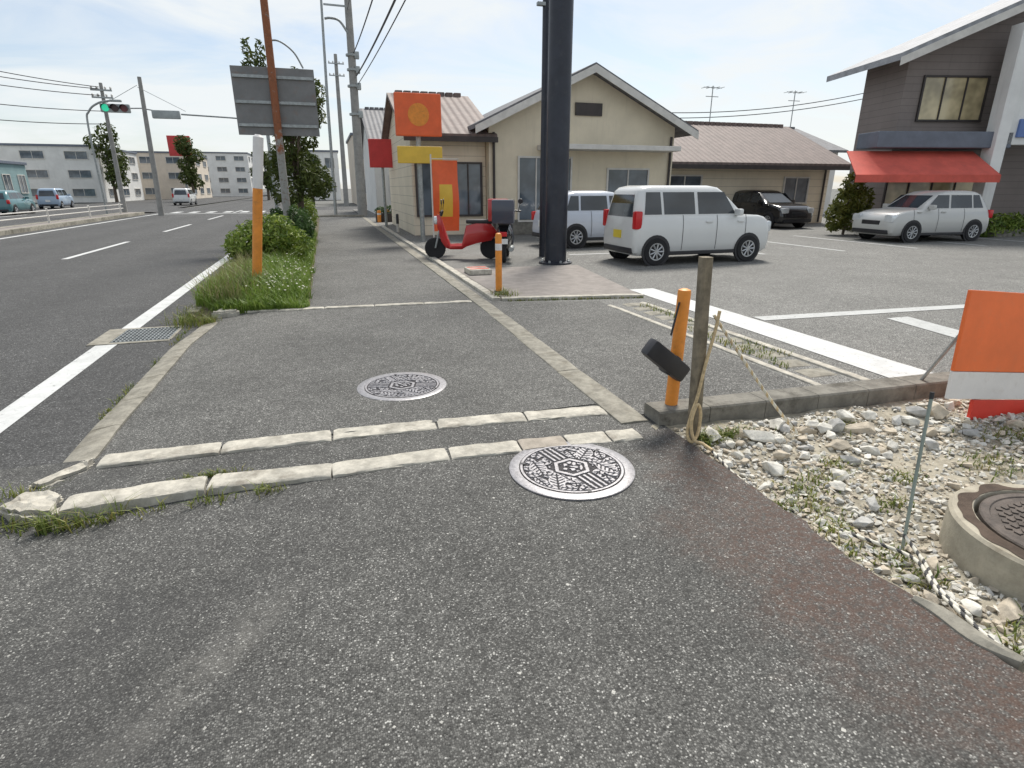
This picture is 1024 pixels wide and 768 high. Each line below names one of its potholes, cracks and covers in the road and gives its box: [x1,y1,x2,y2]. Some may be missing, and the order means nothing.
manhole cover [938,483,1024,606]
manhole cover [357,372,447,401]
drain grate [86,325,184,346]
manhole cover [509,442,635,501]
